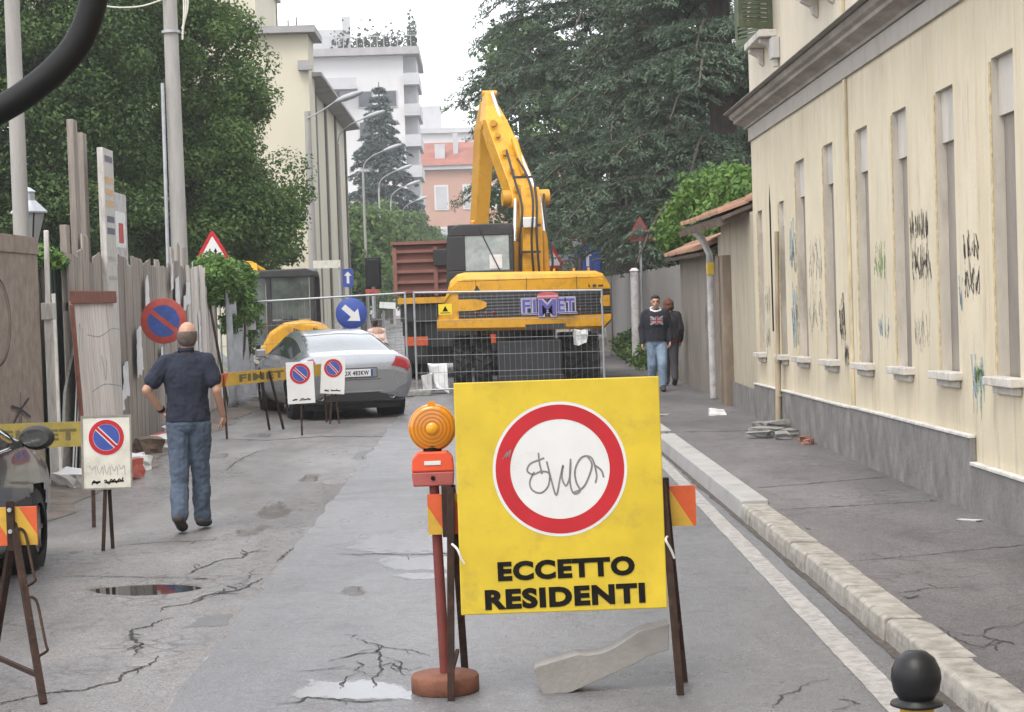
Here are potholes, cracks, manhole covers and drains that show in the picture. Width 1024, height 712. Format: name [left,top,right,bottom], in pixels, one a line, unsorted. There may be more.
pothole [73,581,218,596]
crack [280,634,430,705]
pothole [336,585,373,599]
crack [939,624,1017,651]
crack [772,678,828,707]
crack [0,548,293,704]
pothole [250,501,297,520]
